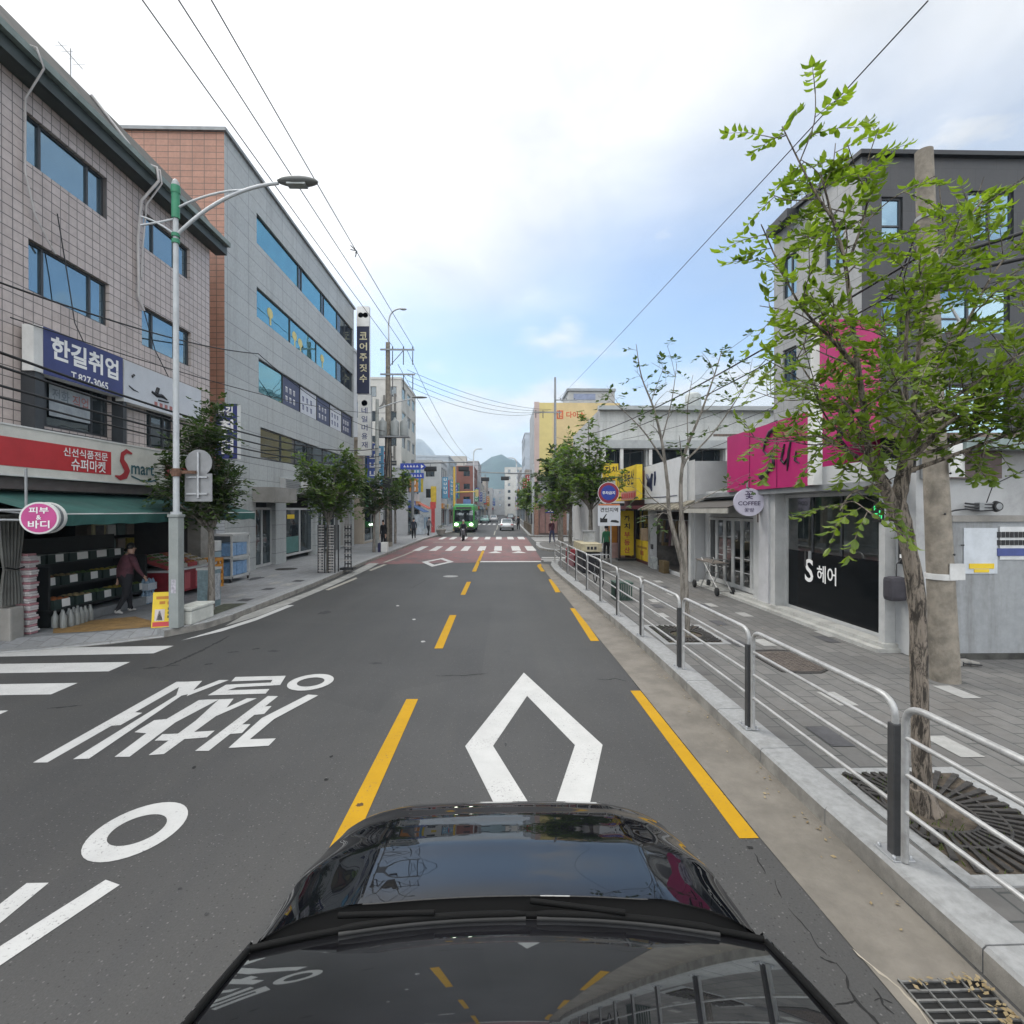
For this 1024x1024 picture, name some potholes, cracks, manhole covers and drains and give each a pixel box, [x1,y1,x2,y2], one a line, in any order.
drain grate [897,971,1024,1024]
manhole cover [755,649,828,674]
crack [144,636,260,669]
crack [754,853,929,1024]
